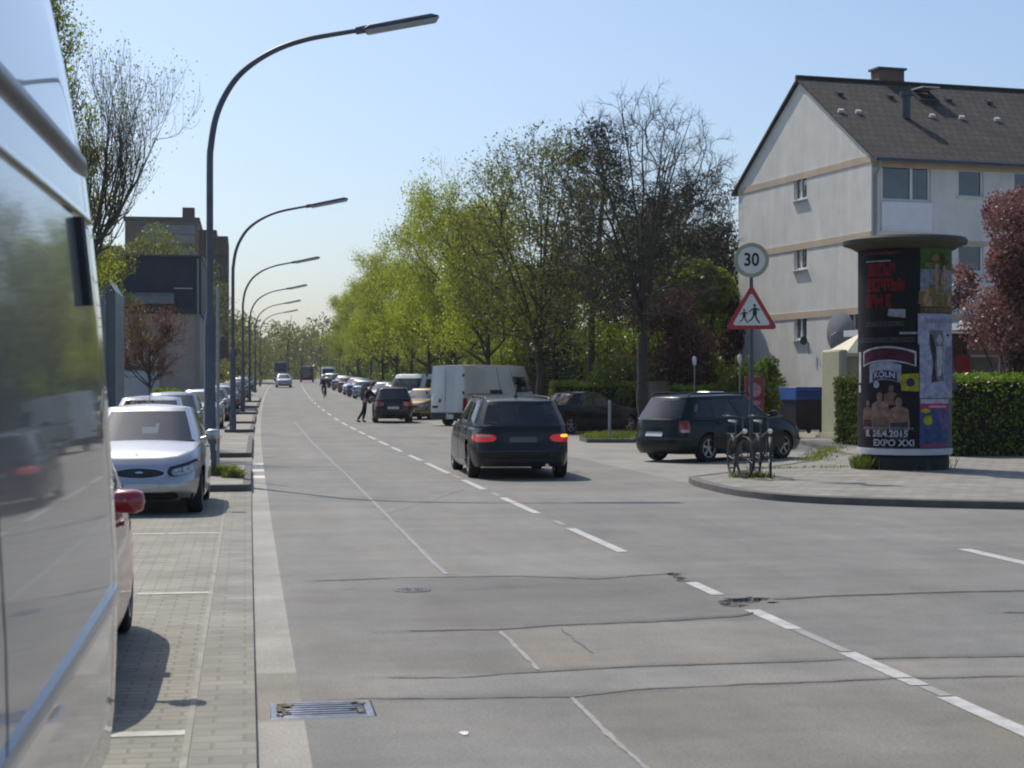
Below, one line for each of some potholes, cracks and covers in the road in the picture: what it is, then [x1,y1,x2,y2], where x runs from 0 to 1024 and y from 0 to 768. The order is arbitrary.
pothole [718,596,779,608]
drain grate [269,700,375,719]
